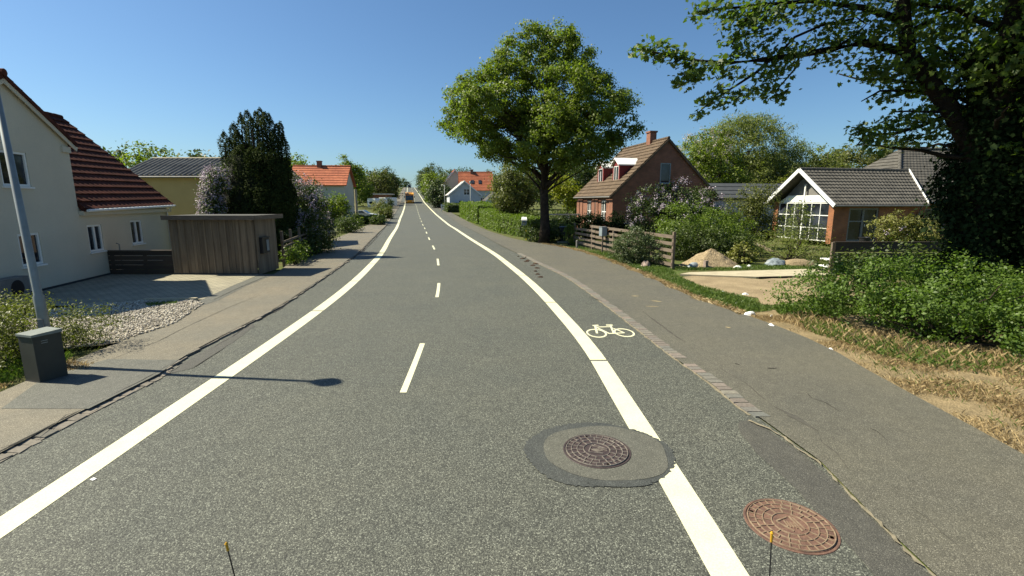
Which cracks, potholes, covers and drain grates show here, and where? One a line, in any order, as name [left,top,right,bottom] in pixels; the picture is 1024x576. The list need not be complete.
crack [720,363,848,468]
manhole cover [563,434,631,469]
manhole cover [743,498,841,555]
